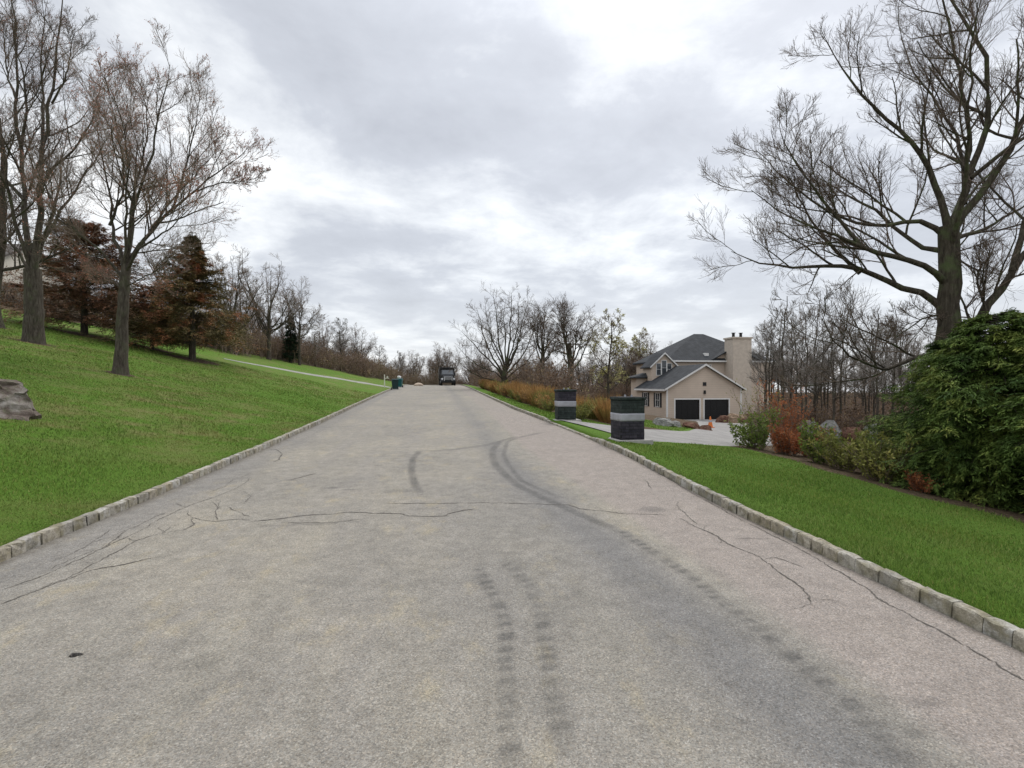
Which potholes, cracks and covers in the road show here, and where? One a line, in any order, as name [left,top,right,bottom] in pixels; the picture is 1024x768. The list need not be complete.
crack [259,467,1024,680]
crack [1,474,251,604]
